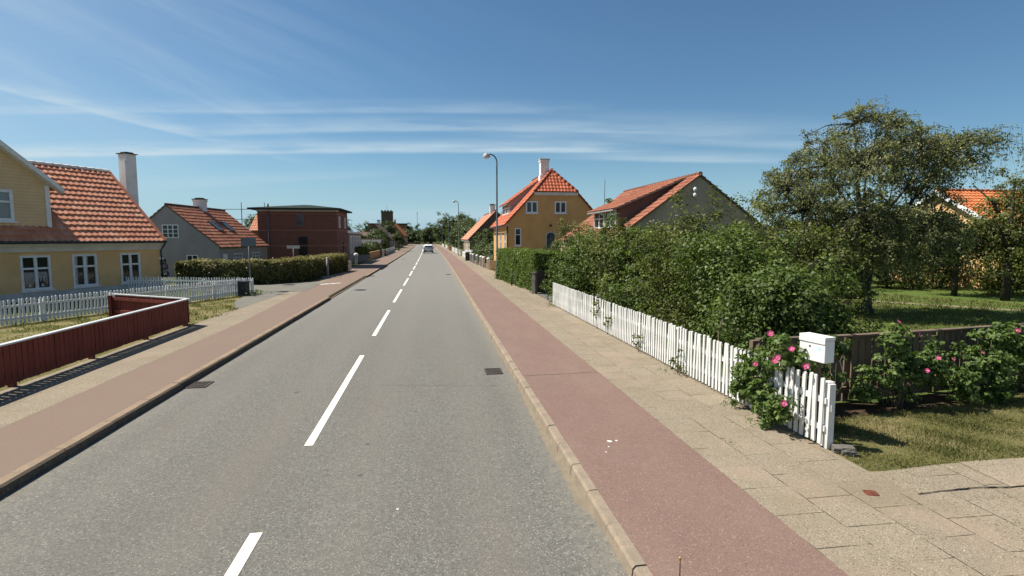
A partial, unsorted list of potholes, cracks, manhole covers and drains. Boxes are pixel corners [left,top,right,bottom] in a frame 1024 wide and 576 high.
crack [917,485,1024,494]
drain grate [184,381,214,389]
